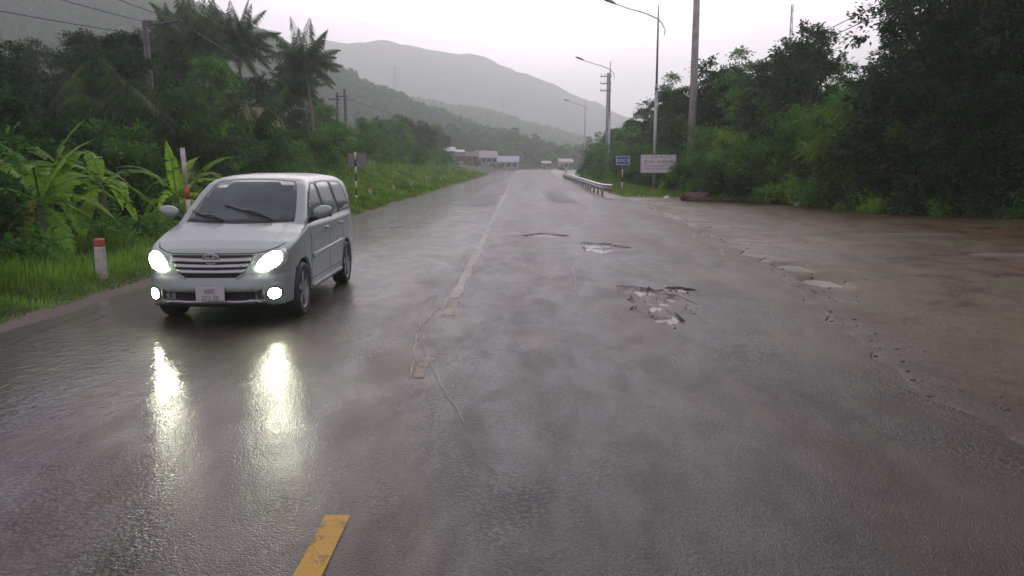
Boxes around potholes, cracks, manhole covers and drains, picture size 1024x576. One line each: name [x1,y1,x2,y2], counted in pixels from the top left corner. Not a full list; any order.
pothole [616,285,698,329]
pothole [580,242,631,254]
crack [409,242,477,424]
